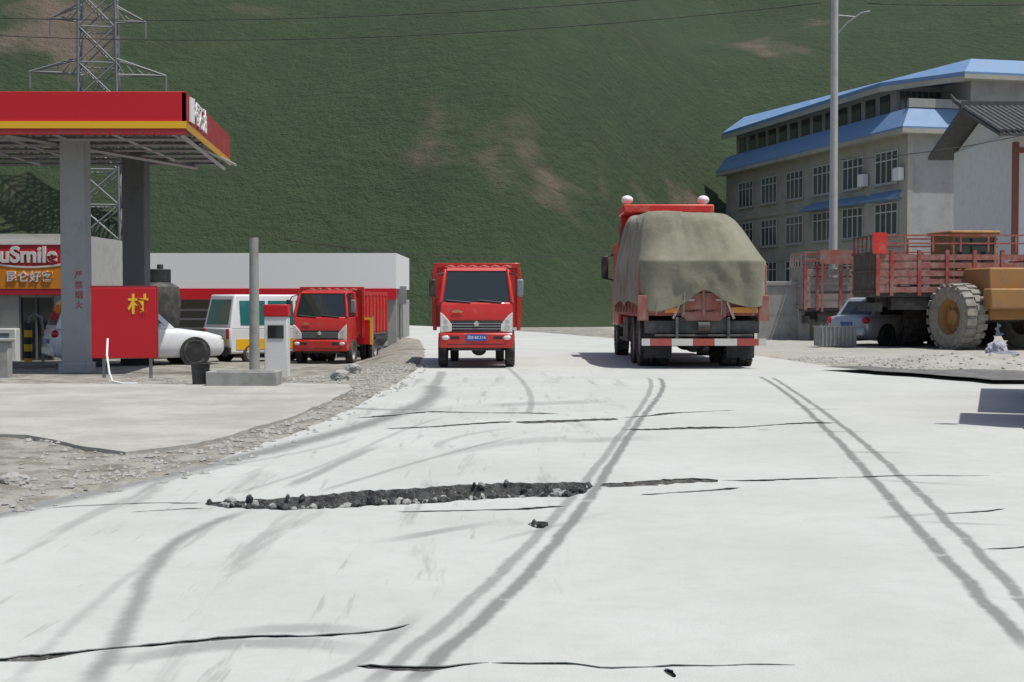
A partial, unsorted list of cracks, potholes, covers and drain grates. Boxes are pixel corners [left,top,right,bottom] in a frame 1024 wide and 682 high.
crack [0,625,407,662]
crack [601,475,936,495]
crack [362,410,824,430]
crack [357,663,761,677]
pothole [205,479,593,512]
